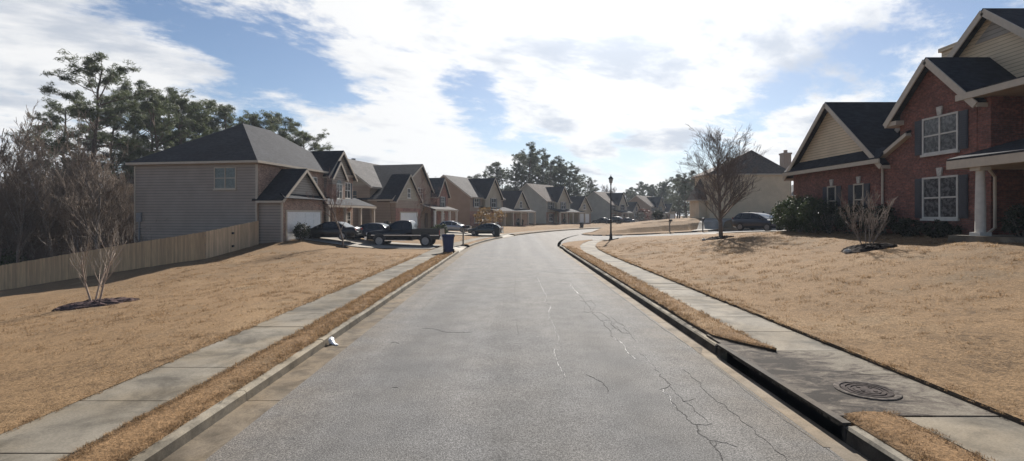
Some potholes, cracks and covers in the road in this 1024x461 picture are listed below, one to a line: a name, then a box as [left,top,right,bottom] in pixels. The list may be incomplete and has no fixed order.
manhole cover [833,380,903,401]
crack [535,271,787,461]
